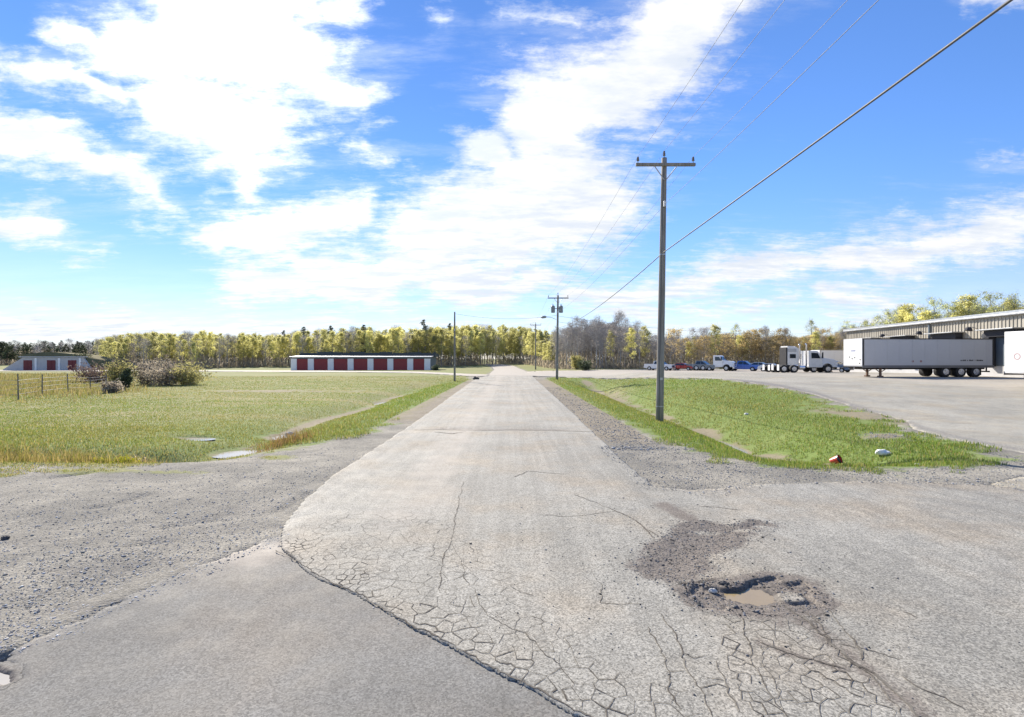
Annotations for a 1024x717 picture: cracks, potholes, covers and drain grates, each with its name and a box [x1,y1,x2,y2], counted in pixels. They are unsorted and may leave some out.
pothole [674,571,835,617]
crack [276,485,964,717]
